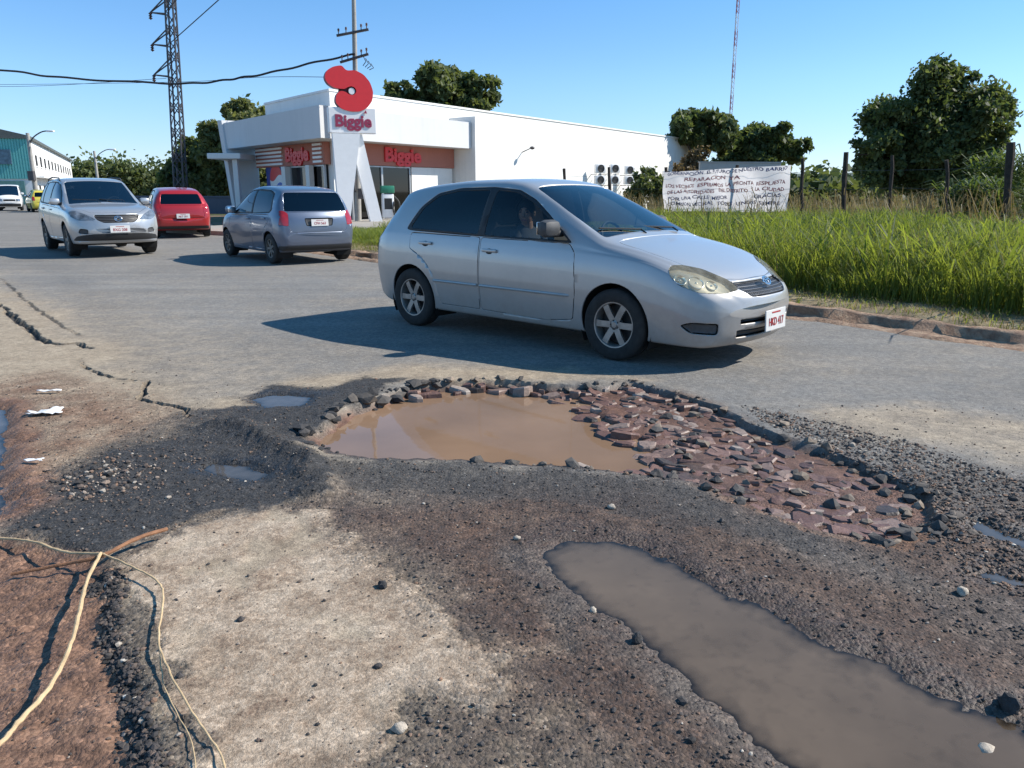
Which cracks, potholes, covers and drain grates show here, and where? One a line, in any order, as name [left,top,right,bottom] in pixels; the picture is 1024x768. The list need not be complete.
pothole [293,375,1007,547]
pothole [245,391,317,408]
crack [0,278,191,418]
pothole [198,457,275,481]
pothole [524,527,1024,768]
